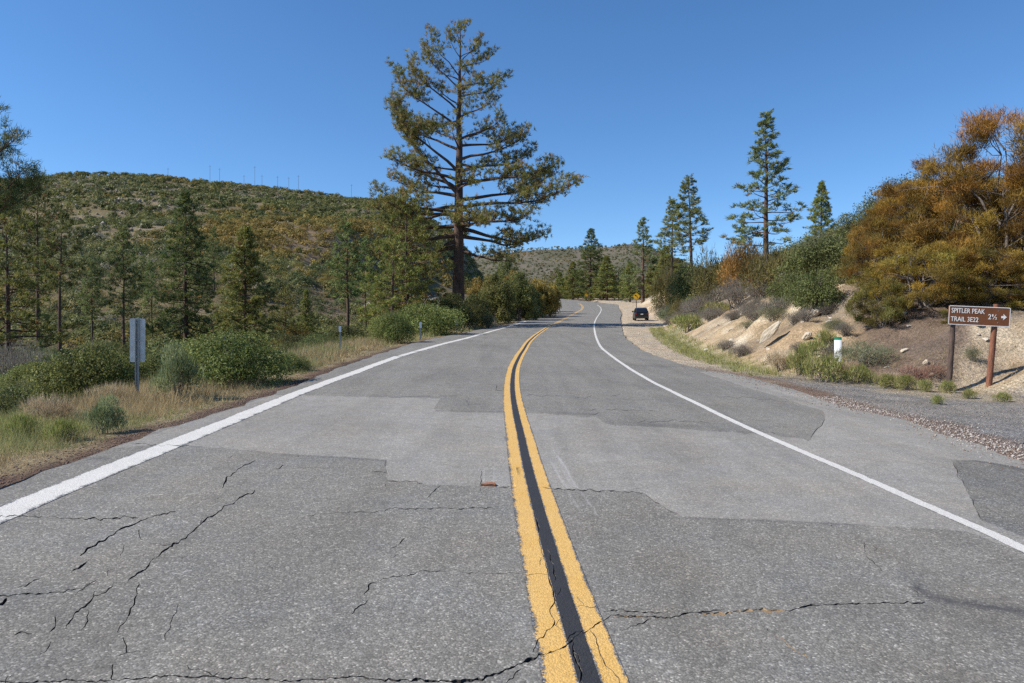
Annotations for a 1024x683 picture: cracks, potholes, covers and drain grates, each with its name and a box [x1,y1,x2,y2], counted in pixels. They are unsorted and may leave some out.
crack [0,454,924,683]
